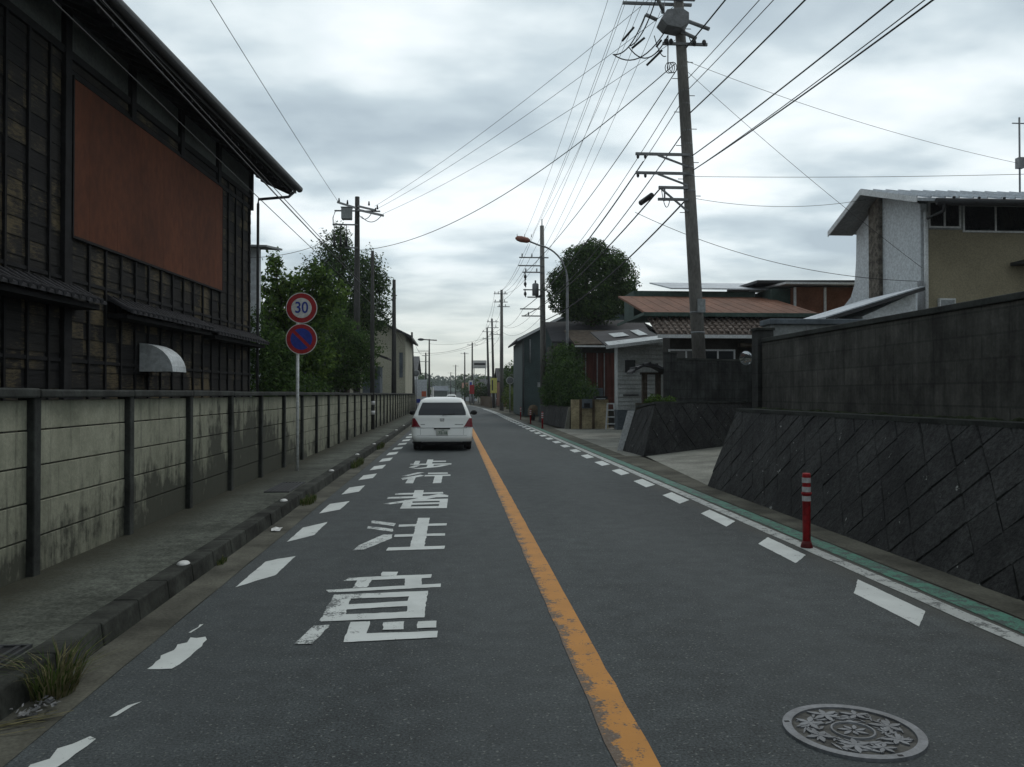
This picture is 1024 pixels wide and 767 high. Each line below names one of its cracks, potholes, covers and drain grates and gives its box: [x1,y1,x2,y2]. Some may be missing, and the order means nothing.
drain grate [264,482,305,493]
manhole cover [782,704,929,762]
drain grate [0,644,33,666]
